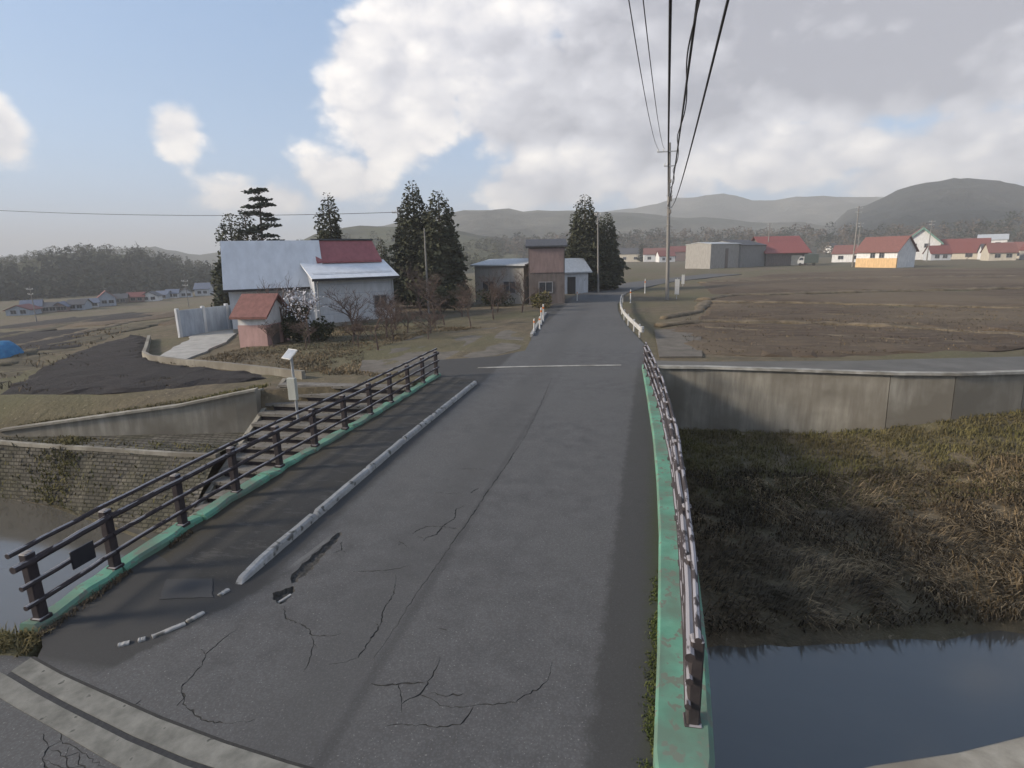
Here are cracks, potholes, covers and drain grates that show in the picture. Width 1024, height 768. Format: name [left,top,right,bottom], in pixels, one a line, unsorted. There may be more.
pothole [272,586,295,603]
crack [371,657,551,728]
pothole [290,532,342,583]
crack [283,606,341,668]
crack [353,378,552,657]
crack [37,733,104,768]
crack [177,630,254,724]
